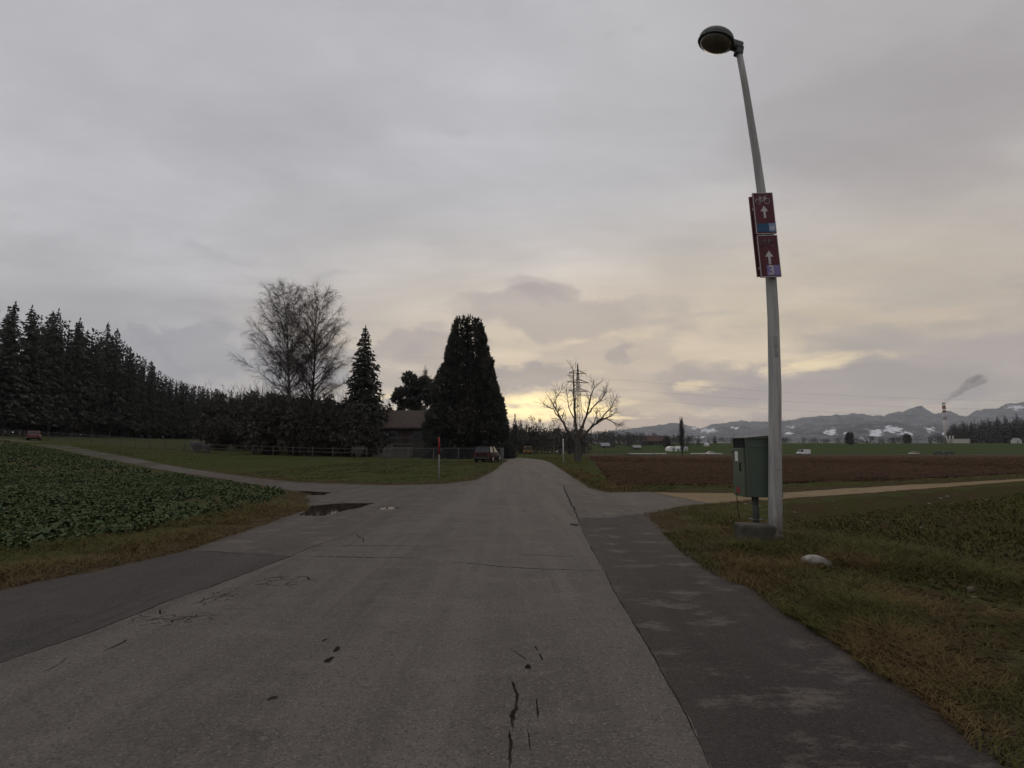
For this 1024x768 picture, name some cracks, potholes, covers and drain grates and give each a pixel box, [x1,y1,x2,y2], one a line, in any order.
crack [456,486,711,768]
crack [210,533,403,558]
